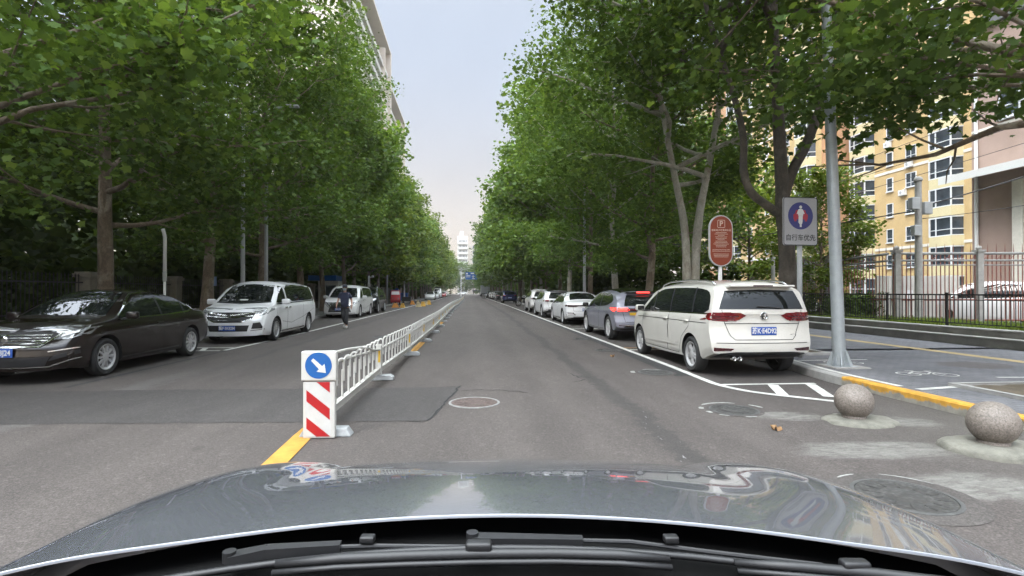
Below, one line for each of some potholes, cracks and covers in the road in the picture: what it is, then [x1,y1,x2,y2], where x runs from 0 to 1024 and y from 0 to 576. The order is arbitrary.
manhole cover [449,397,500,409]
manhole cover [828,473,995,526]
manhole cover [699,402,765,417]
